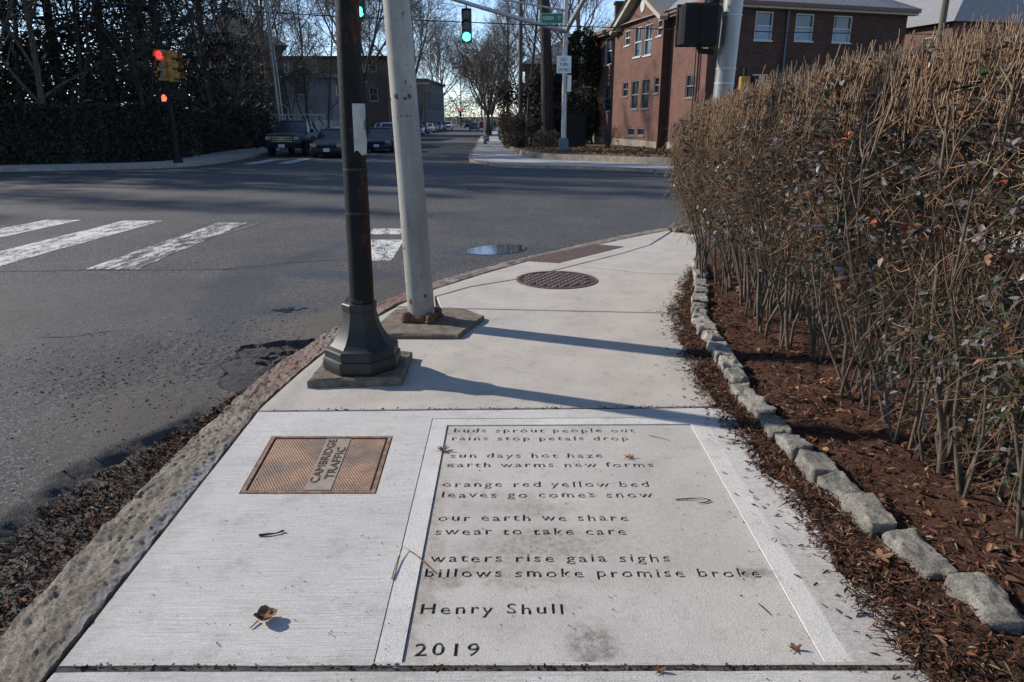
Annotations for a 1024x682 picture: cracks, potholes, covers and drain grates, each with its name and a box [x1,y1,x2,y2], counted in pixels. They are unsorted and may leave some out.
manhole cover [240,436,392,494]
manhole cover [516,271,597,289]
pothole [217,338,316,393]
